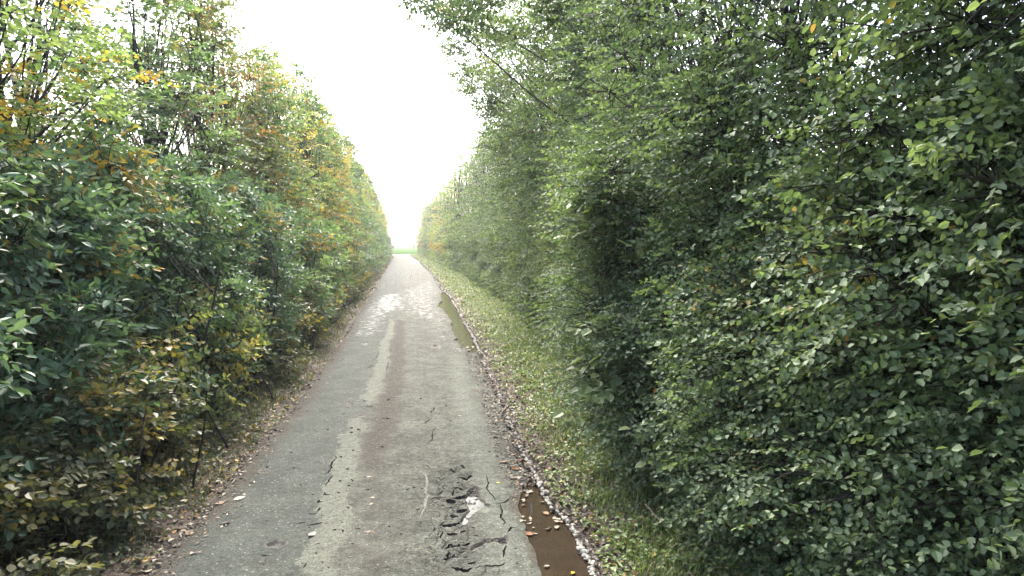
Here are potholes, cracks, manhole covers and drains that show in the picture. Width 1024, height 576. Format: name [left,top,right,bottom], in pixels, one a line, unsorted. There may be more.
crack [296,456,361,544]
crack [406,407,519,572]
